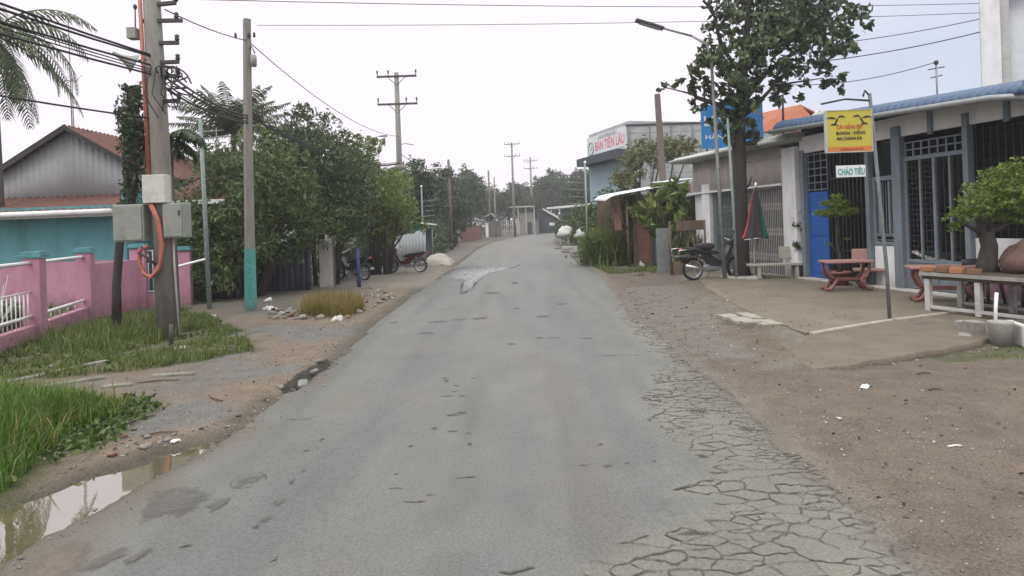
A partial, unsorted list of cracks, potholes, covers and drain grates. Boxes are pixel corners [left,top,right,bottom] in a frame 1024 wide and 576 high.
pothole [281,359,331,395]
crack [583,299,911,576]
